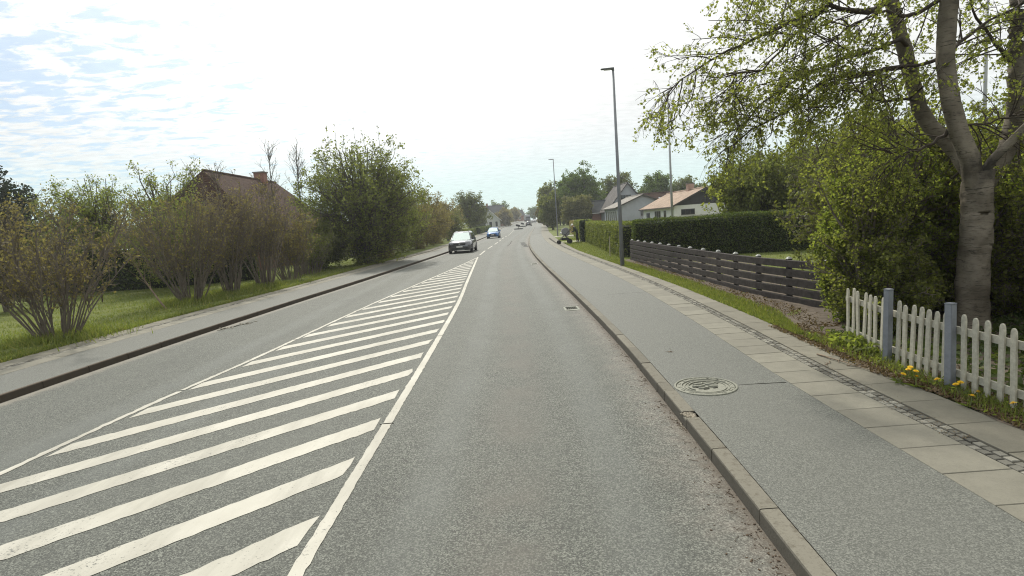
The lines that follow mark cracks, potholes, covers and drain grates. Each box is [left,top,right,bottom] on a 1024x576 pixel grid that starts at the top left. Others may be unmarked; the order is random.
manhole cover [674,377,738,396]
